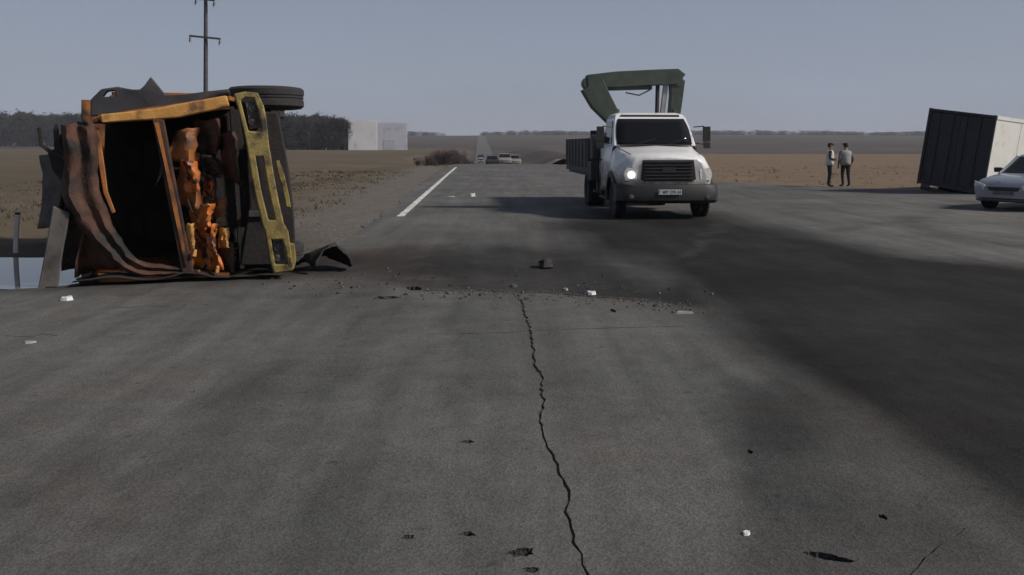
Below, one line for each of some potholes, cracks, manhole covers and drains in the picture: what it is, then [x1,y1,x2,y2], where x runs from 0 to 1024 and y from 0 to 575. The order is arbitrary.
pothole [507,548,533,557]
pothole [803,551,854,563]
crack [455,294,637,575]
crack [907,528,965,575]
